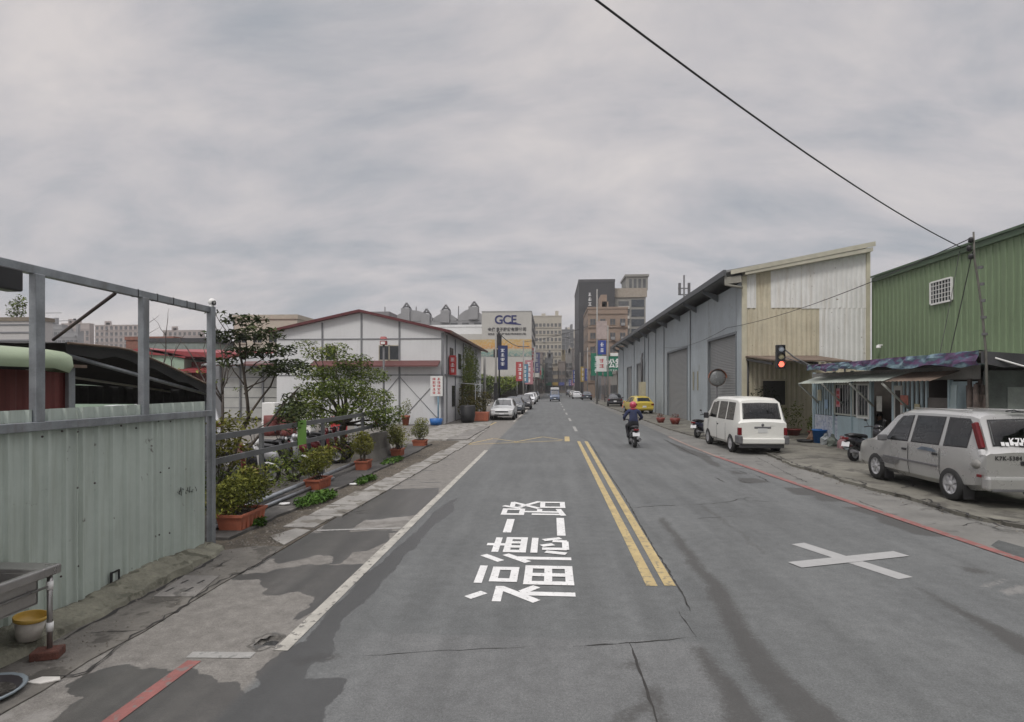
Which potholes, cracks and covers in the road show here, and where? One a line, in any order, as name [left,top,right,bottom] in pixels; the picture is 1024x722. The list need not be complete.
pothole [246,633,286,652]
